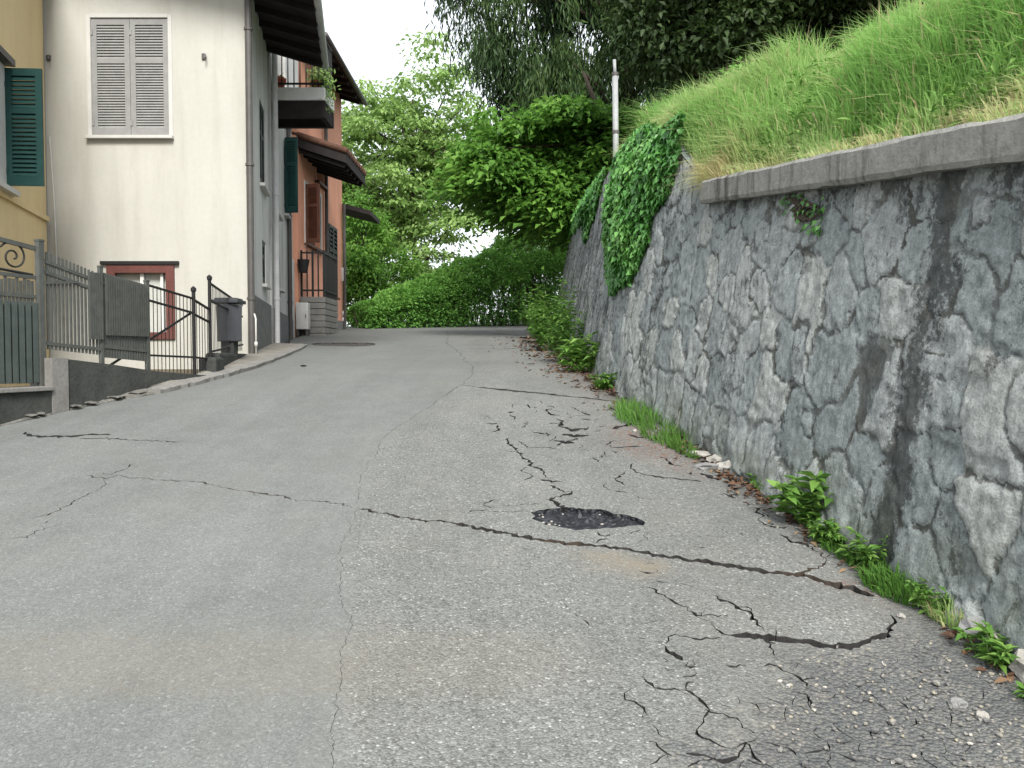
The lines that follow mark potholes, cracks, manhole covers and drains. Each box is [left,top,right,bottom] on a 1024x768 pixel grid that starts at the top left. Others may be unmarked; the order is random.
crack [362,385,1024,768]
crack [23,432,182,442]
crack [10,464,352,539]
